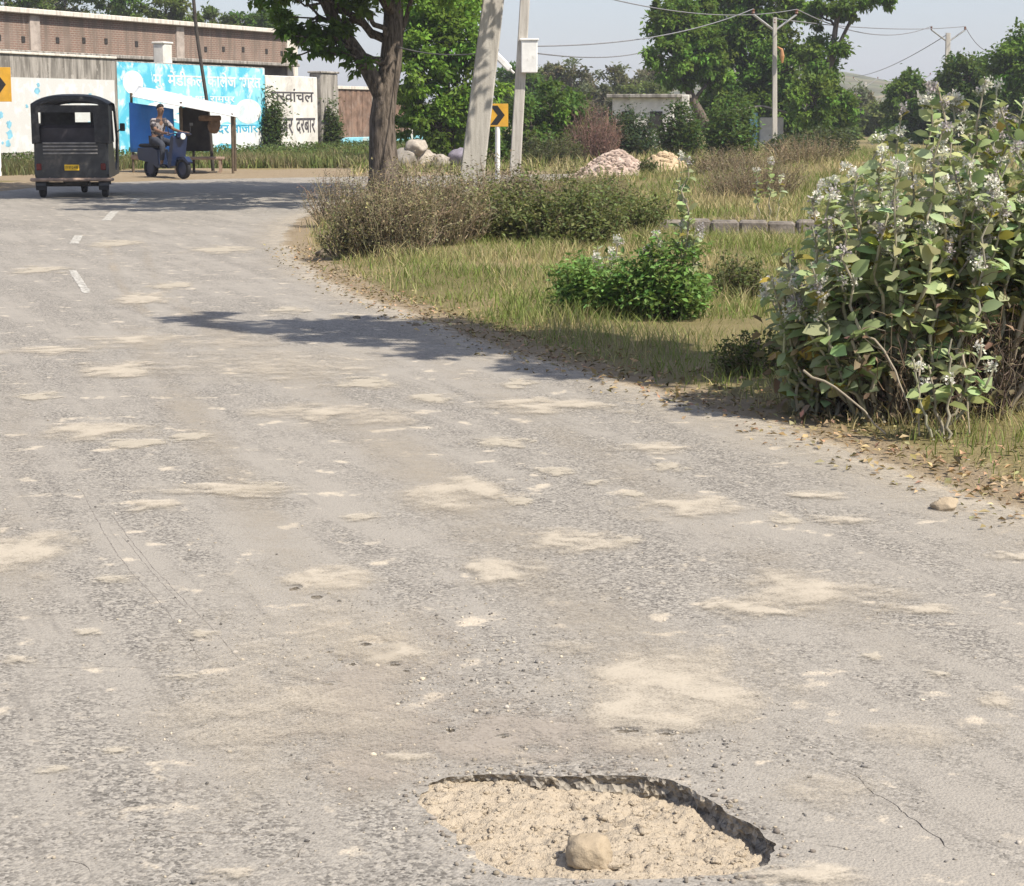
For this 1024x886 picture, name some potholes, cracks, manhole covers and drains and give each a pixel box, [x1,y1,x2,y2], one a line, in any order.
crack [22,490,242,669]
pothole [416,774,776,880]
crack [847,771,954,851]
